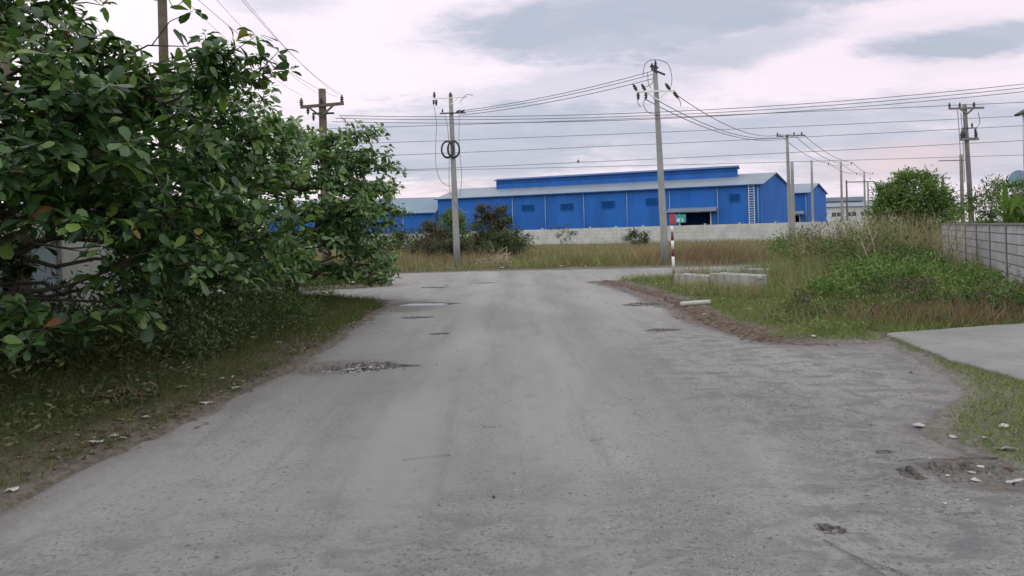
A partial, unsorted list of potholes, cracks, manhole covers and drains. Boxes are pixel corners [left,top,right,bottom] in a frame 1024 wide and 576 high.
pothole [299,359,437,377]
pothole [875,457,1024,491]
